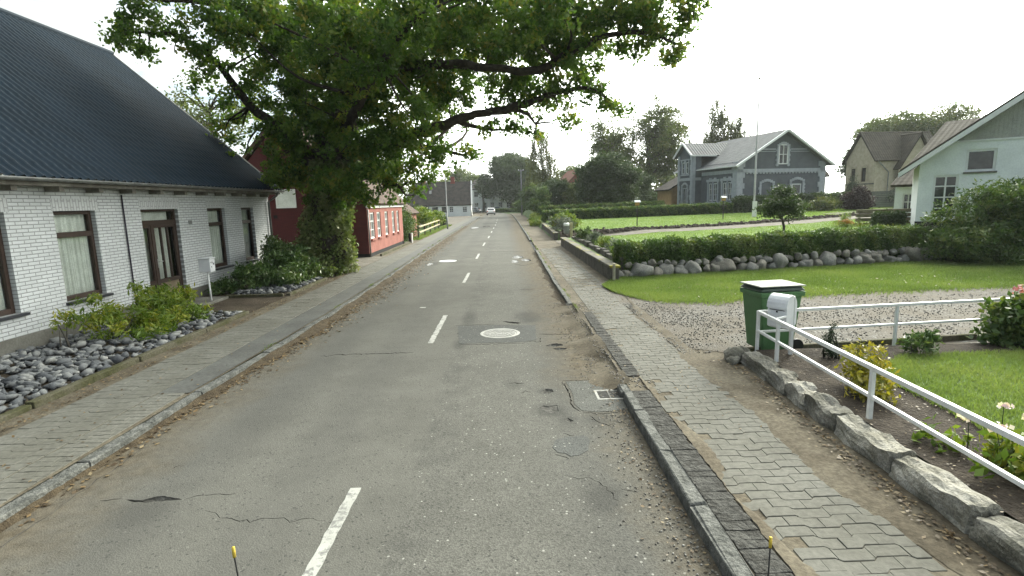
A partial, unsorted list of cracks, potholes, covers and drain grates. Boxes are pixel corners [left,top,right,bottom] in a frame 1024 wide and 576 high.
pothole [539,405,559,413]
manhole cover [480,328,520,338]
crack [191,493,320,523]
drain grate [593,389,623,400]
